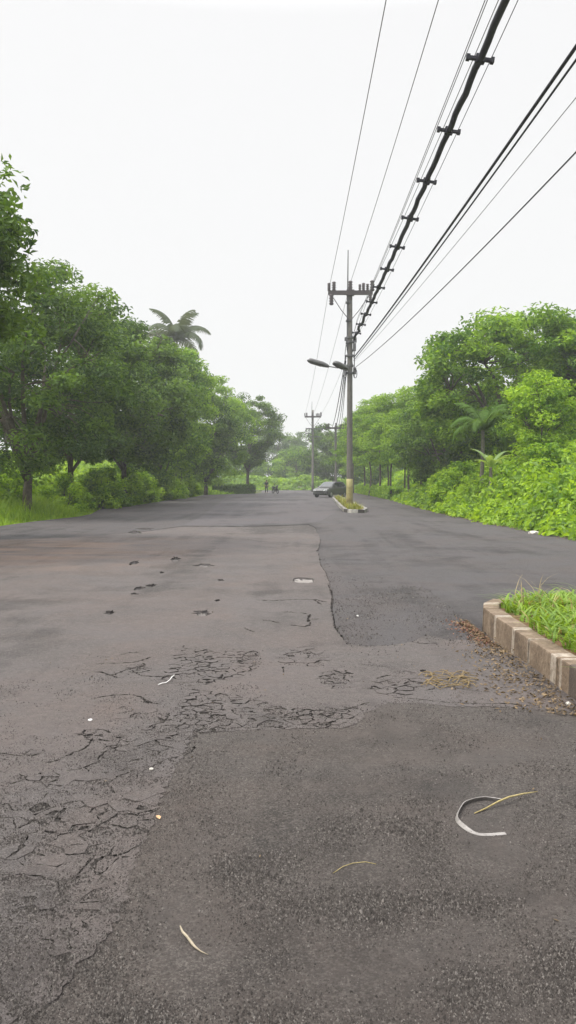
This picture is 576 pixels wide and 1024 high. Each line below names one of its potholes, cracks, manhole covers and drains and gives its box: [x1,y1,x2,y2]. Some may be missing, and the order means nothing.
crack [0,646,465,991]
crack [273,599,325,627]
